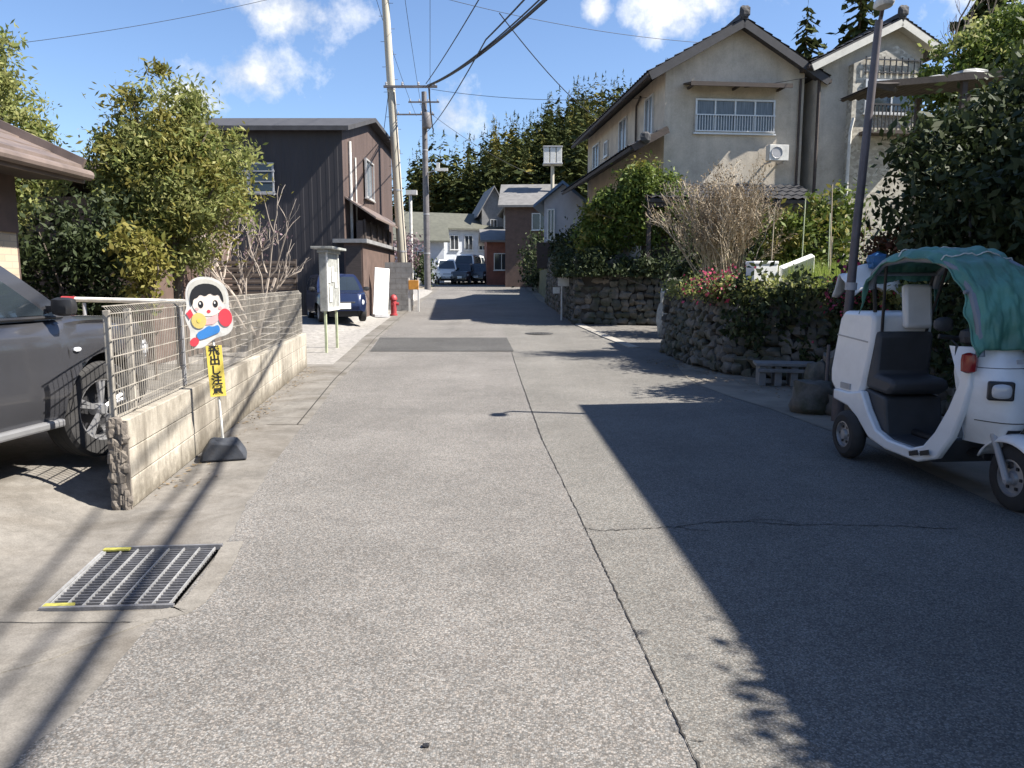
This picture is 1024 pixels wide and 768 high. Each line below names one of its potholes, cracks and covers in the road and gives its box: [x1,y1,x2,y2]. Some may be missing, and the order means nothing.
crack [512,354,959,768]
drain grate [38,543,223,612]
